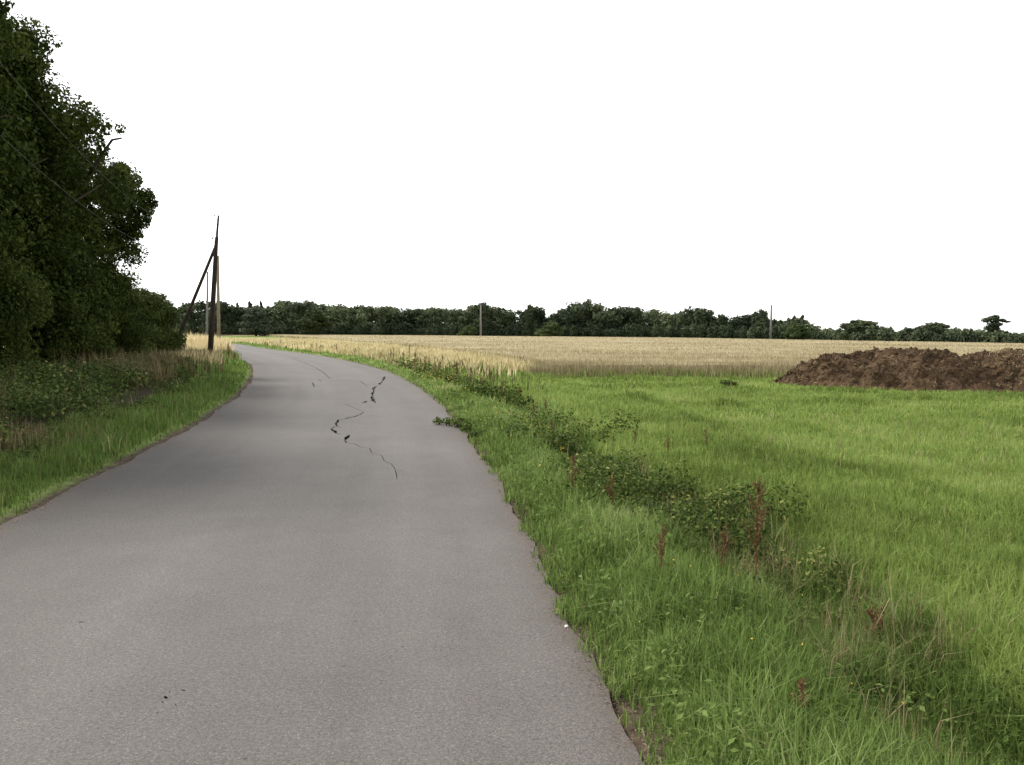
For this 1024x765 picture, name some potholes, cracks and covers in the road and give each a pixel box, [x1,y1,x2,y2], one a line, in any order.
crack [300,361,397,479]
